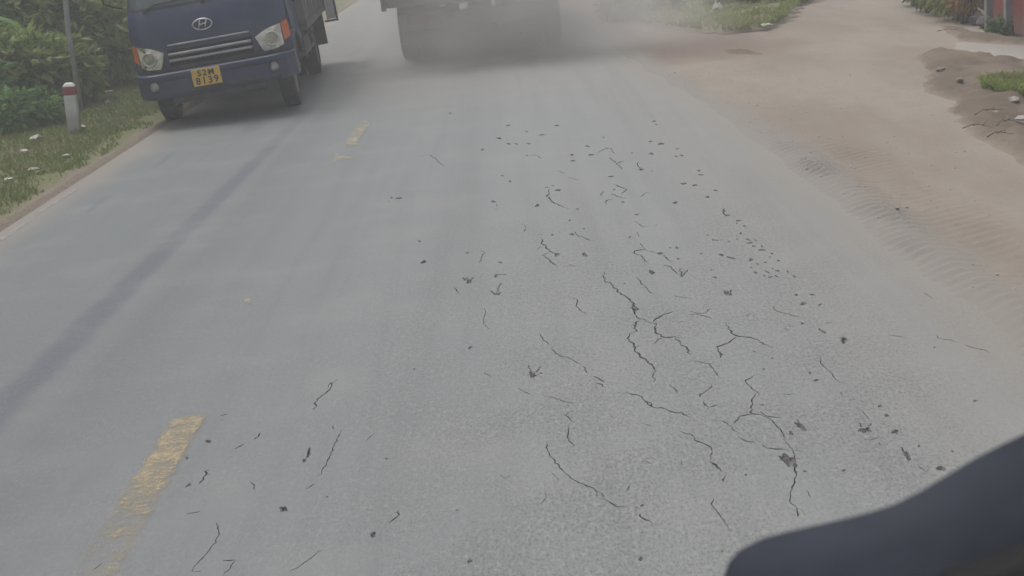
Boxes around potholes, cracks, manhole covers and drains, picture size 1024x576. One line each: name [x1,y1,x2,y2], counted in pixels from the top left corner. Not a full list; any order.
crack [524,226,574,268]
crack [540,223,810,532]
crack [192,523,235,574]
crack [517,387,653,524]
crack [599,148,649,204]
